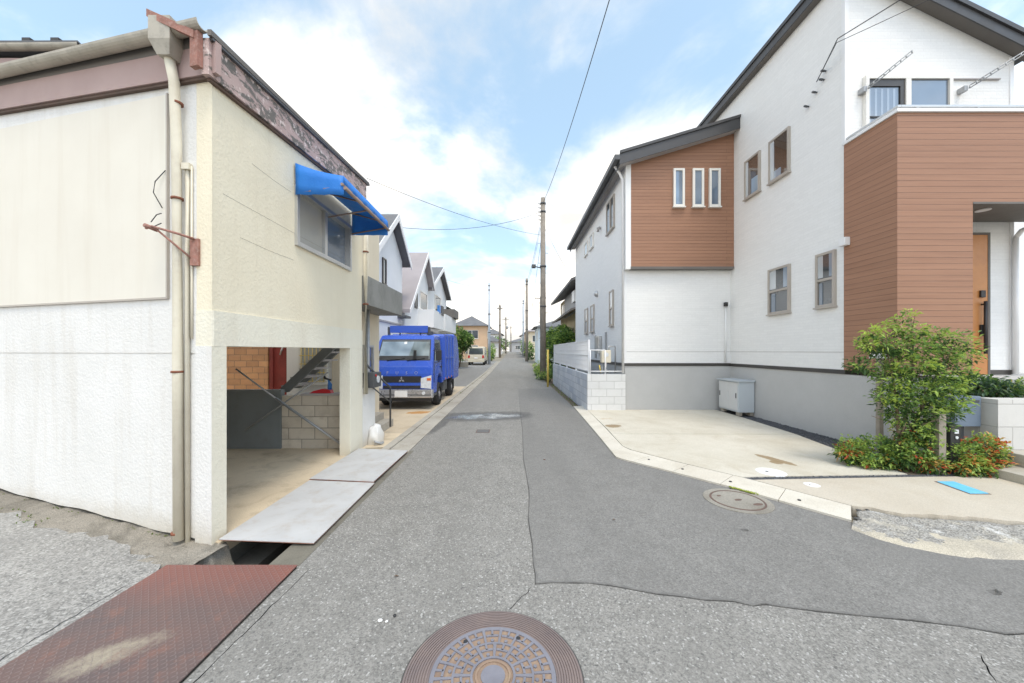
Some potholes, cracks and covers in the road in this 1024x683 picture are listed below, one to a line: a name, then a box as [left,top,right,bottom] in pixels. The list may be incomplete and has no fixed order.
manhole cover [400,611,585,683]
manhole cover [703,488,775,514]
